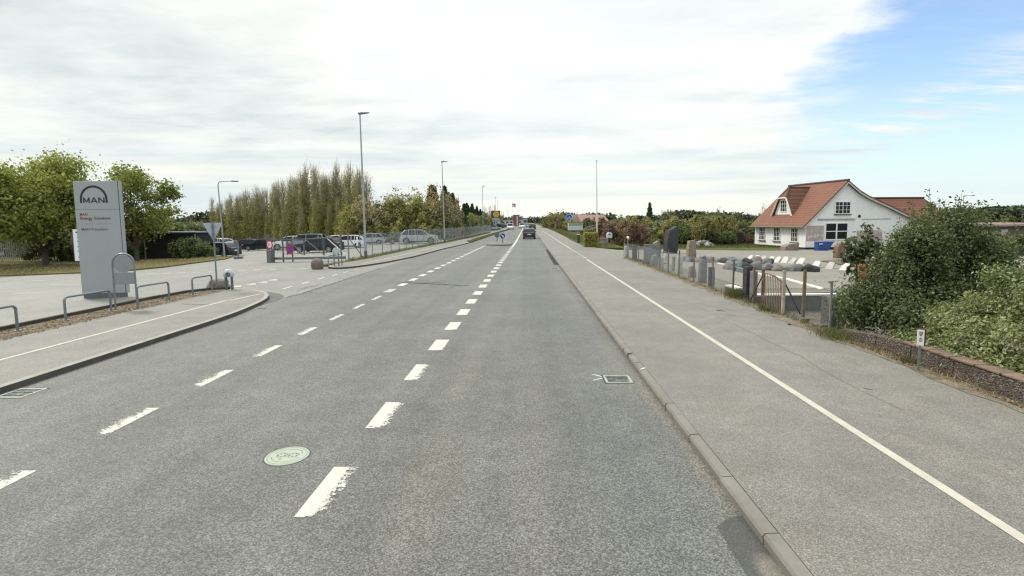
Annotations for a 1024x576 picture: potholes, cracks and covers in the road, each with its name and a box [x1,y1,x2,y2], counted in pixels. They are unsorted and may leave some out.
manhole cover [263,446,311,466]
drain grate [0,388,48,398]
drain grate [601,375,633,383]
